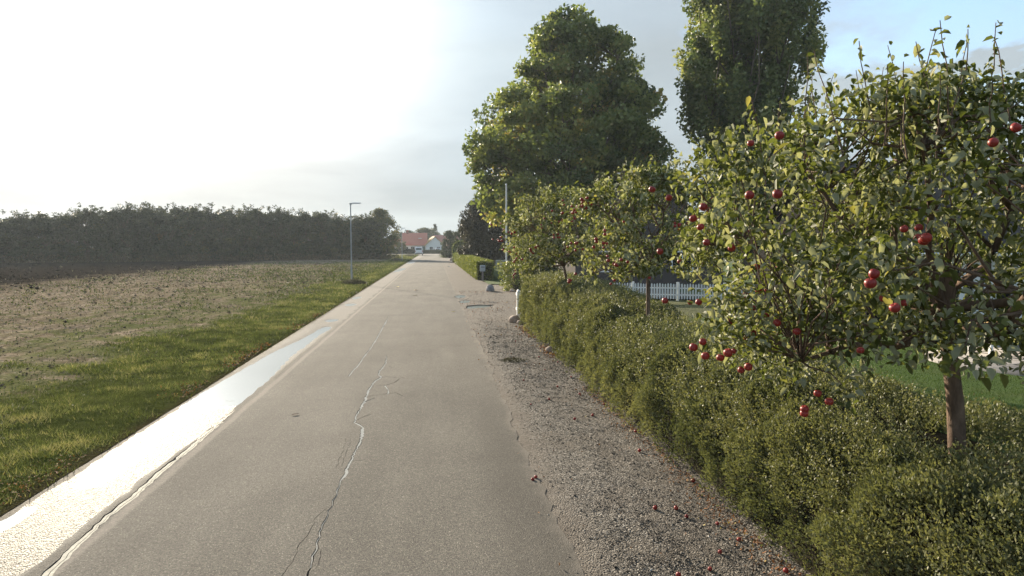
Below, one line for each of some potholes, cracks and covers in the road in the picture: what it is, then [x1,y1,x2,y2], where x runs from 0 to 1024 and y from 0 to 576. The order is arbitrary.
crack [282,316,404,576]
